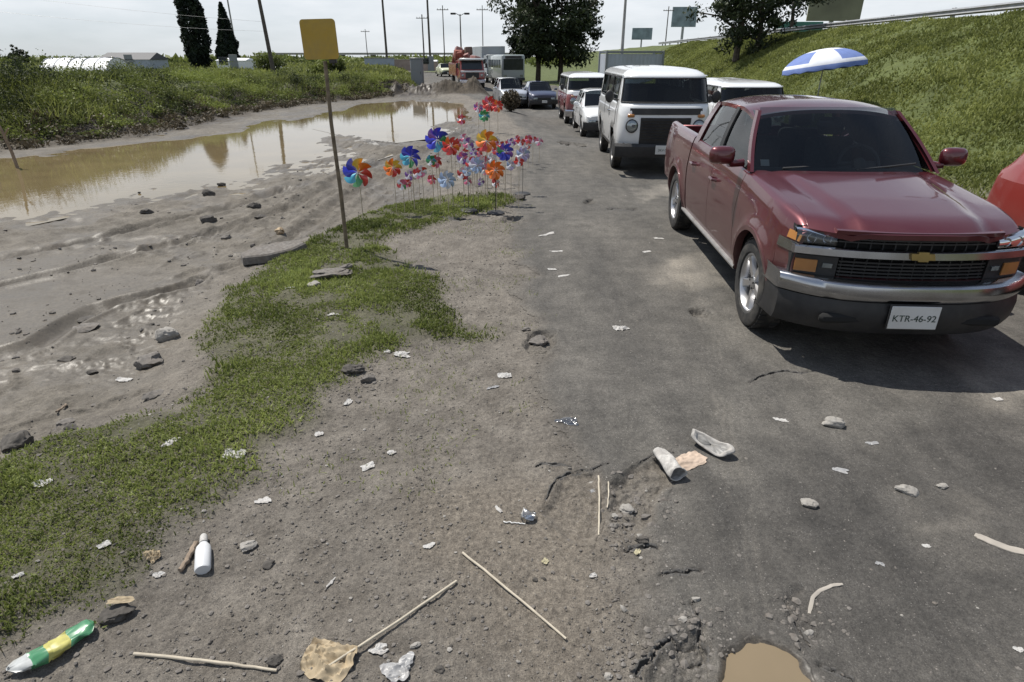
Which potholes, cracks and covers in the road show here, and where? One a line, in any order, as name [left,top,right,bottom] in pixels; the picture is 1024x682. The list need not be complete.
pothole [601,459,677,540]
pothole [520,329,560,354]
pothole [642,623,710,682]
pothole [709,635,816,682]
crack [750,369,816,383]
crack [626,542,700,577]
